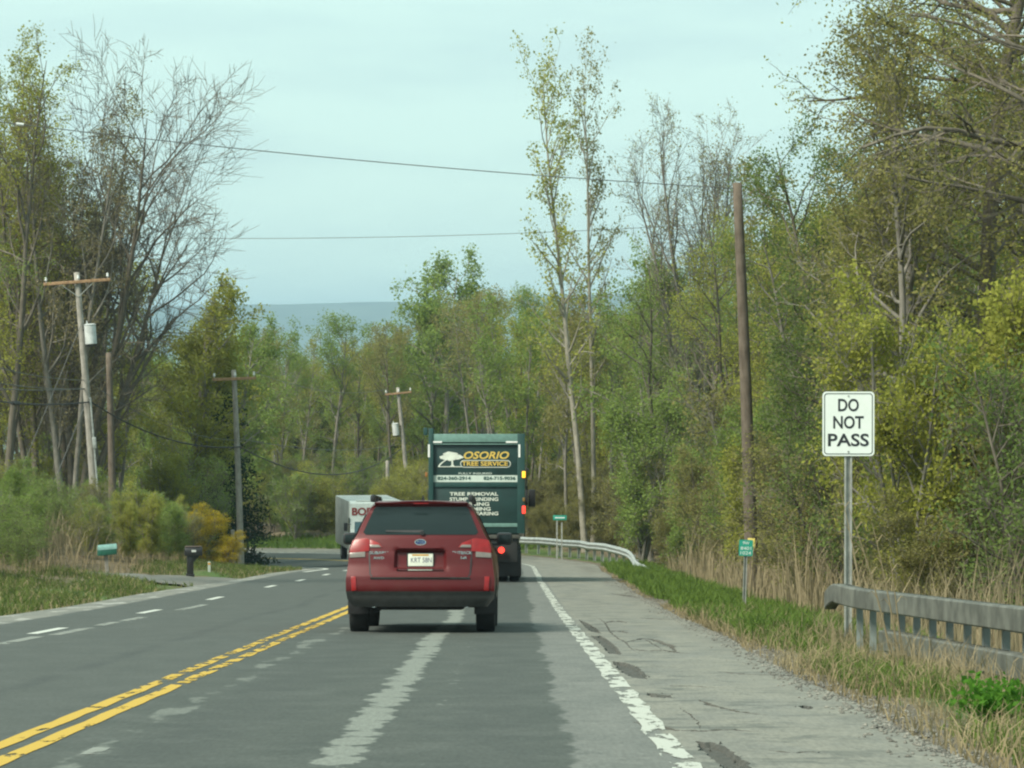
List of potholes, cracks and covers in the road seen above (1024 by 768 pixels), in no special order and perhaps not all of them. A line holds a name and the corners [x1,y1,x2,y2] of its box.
crack [600,618,687,654]
crack [634,671,787,732]
